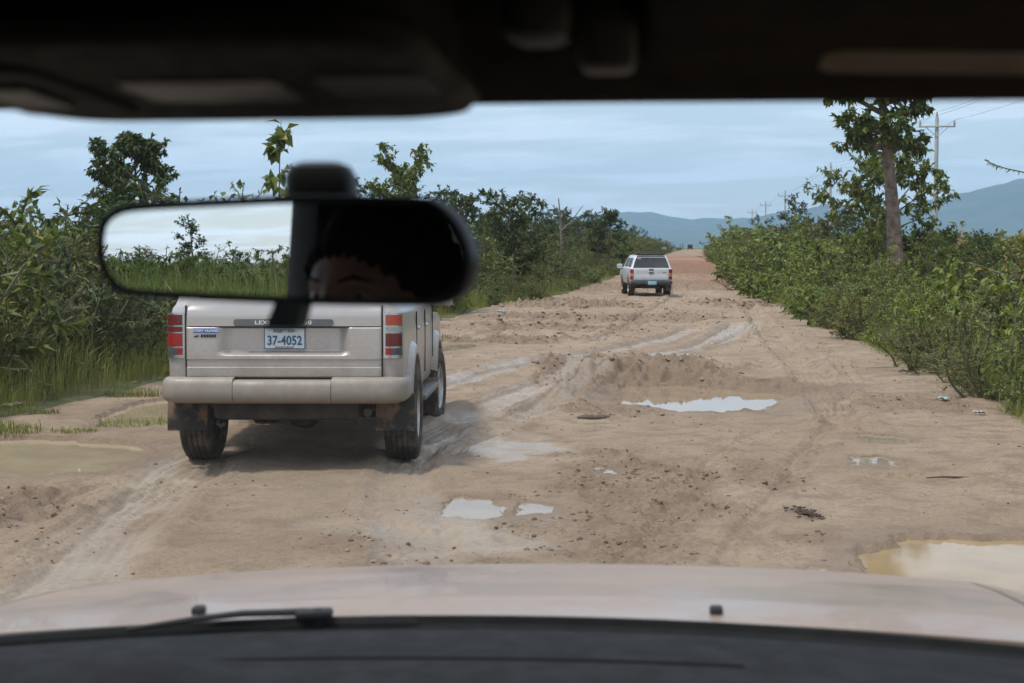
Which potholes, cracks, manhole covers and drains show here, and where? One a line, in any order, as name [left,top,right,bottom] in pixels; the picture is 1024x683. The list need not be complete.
pothole [846,531,1024,594]
pothole [500,500,557,516]
pothole [845,454,905,469]
pothole [0,434,158,477]
pothole [435,494,512,519]
